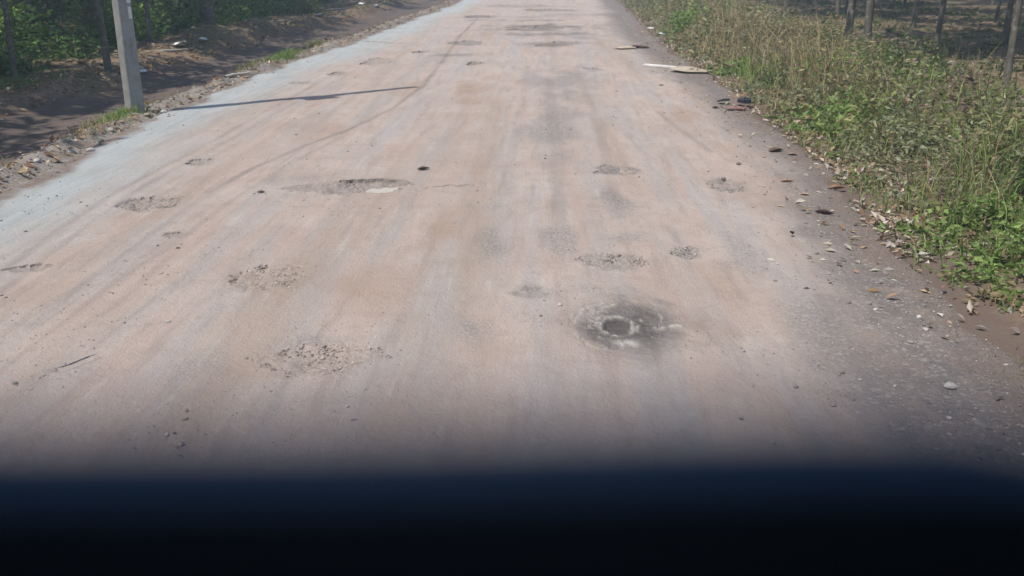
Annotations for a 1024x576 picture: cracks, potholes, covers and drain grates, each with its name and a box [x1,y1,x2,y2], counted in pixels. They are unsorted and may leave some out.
pothole [500,282,559,303]
pothole [102,193,193,215]
pothole [587,163,635,177]
pothole [699,176,752,195]
pothole [0,261,65,276]
pothole [179,157,221,167]
pothole [234,339,400,382]
pothole [619,166,645,175]
pothole [216,261,318,296]
pothole [564,250,659,275]
pothole [662,245,707,261]
pothole [552,294,713,363]
